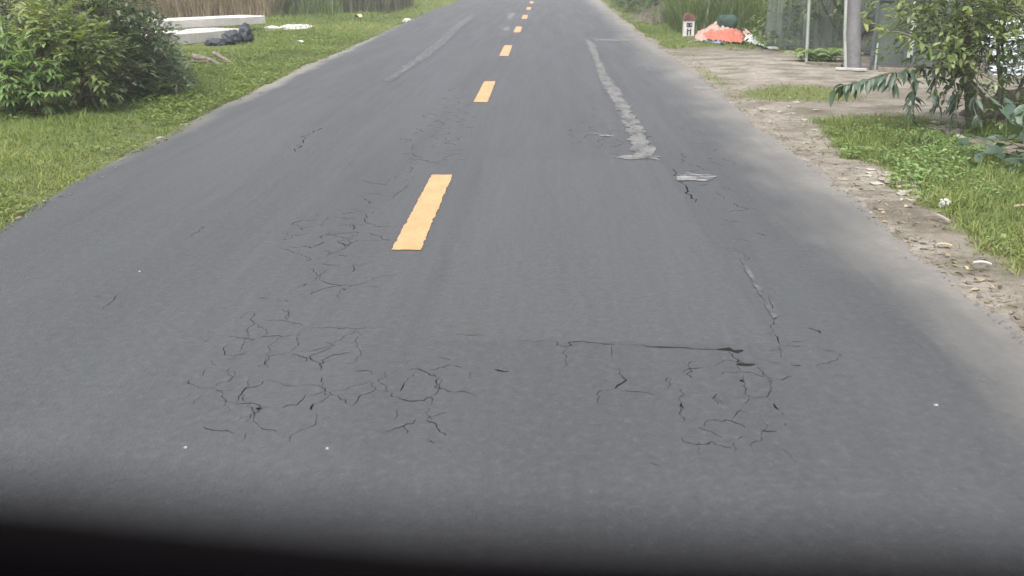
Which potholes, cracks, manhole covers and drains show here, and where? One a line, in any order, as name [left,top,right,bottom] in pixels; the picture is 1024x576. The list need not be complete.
crack [282,84,474,298]
crack [188,297,476,444]
crack [463,130,840,465]
